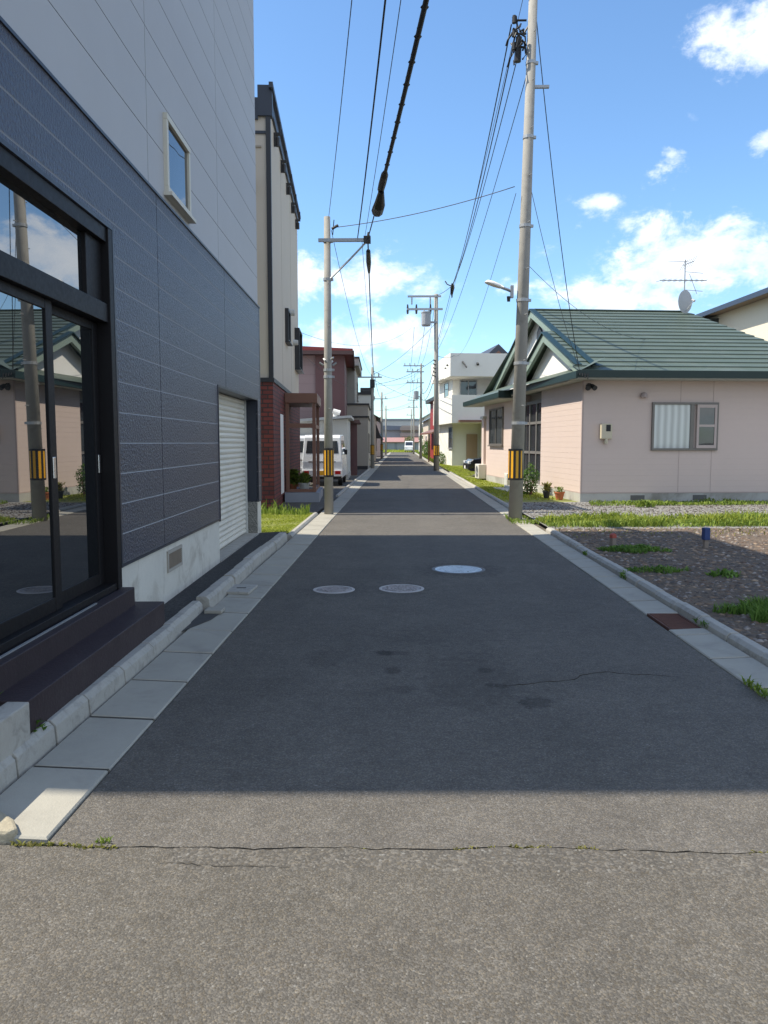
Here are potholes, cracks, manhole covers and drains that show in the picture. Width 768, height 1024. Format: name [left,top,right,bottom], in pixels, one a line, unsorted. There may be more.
crack [509,672,670,686]
manhole cover [379,584,424,593]
manhole cover [313,586,355,594]
manhole cover [432,565,485,574]
drain grate [647,613,701,631]
